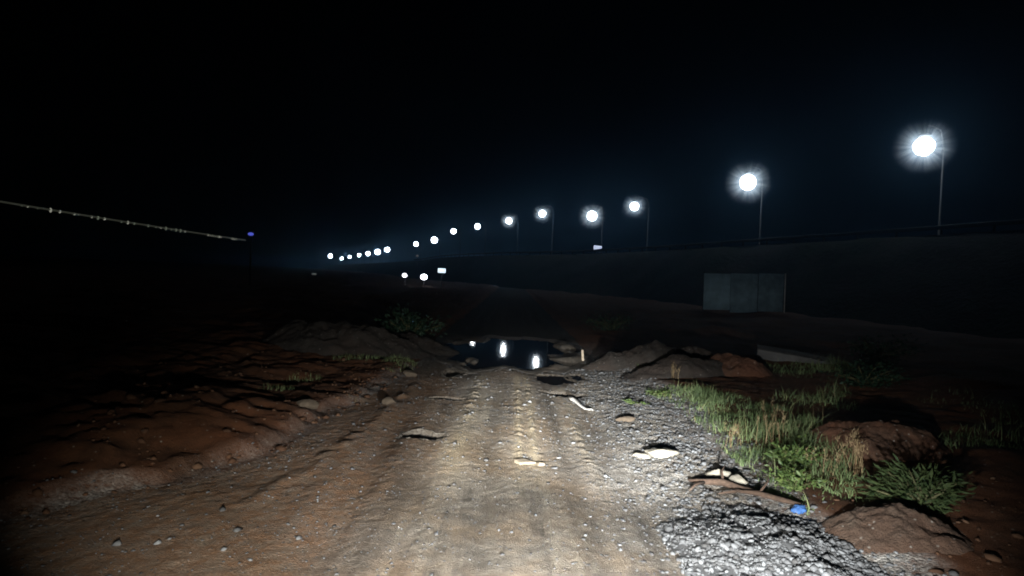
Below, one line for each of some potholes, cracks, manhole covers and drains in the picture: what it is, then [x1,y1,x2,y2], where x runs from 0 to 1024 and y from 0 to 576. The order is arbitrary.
pothole [531,373,578,387]
pothole [432,335,596,375]
pothole [564,373,587,383]
pothole [395,428,450,441]
